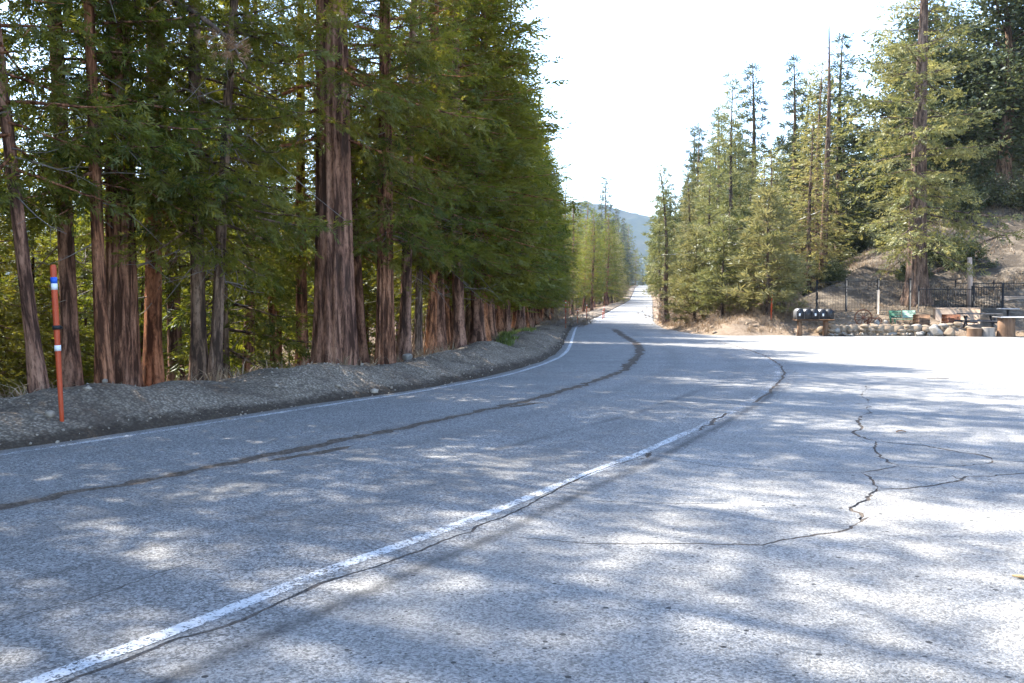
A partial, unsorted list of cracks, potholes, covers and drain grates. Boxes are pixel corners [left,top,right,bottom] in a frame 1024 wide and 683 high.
crack [714,340,786,403]
crack [0,386,1024,683]
